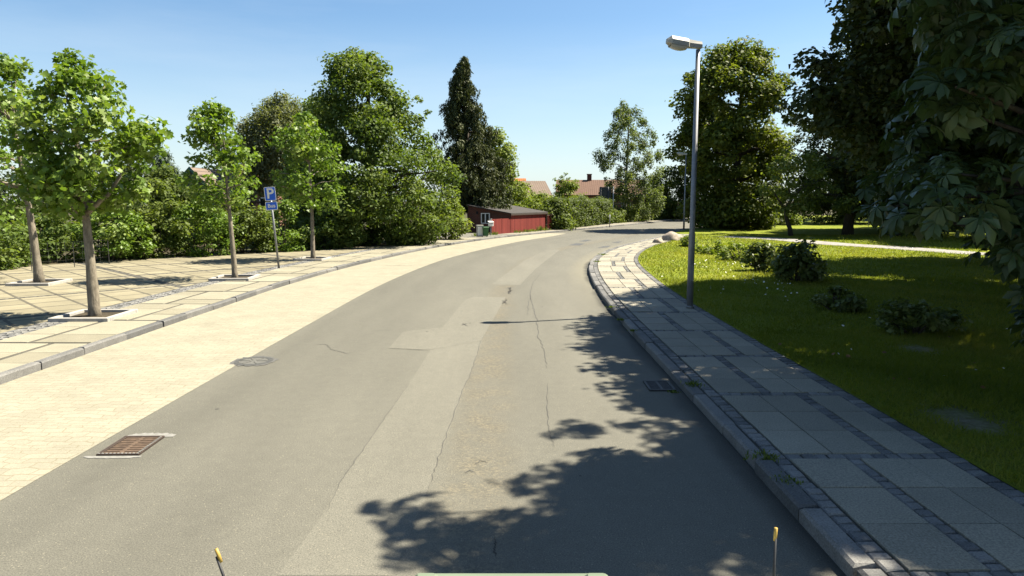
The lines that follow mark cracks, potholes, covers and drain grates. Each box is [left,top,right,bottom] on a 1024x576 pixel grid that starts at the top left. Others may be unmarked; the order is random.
crack [503,282,547,367]
drain grate [83,433,176,459]
manhole cover [230,356,279,366]
drain grate [643,380,676,391]
